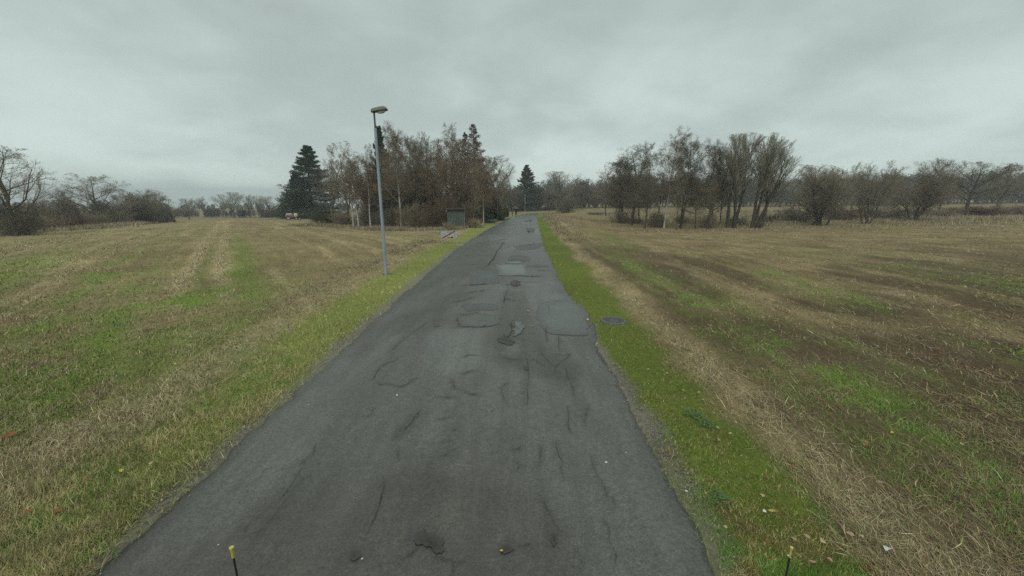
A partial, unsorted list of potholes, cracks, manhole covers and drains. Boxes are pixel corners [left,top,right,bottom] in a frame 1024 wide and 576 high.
crack [501,328,574,401]
pothole [513,320,525,336]
manhole cover [600,316,627,325]
pothole [497,334,515,345]
pothole [414,528,445,553]
